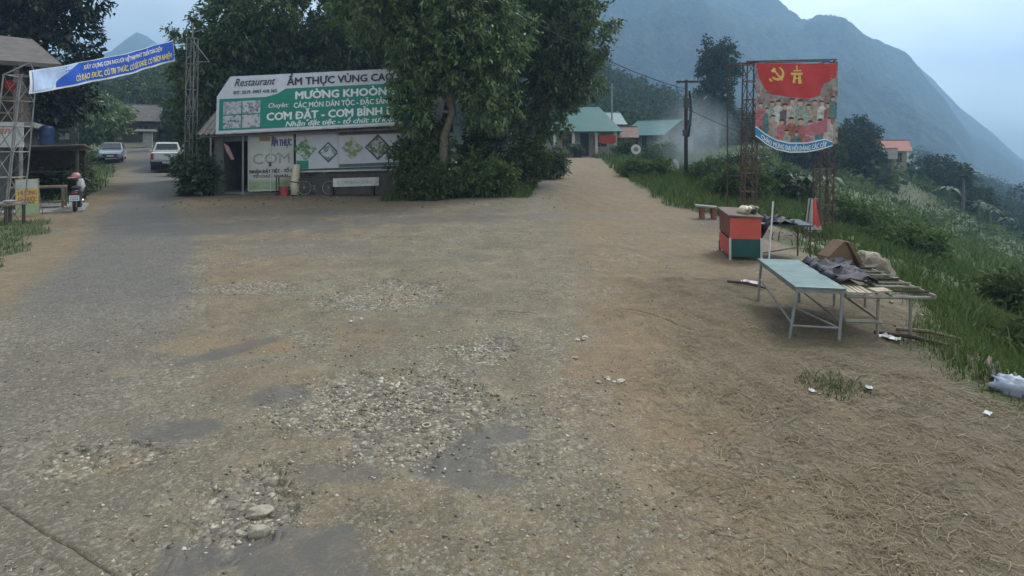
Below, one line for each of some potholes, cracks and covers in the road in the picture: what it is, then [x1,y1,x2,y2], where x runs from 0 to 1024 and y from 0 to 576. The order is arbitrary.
crack [616,306,705,334]
pothole [164,455,312,576]
pothole [298,276,461,317]
pothole [250,365,523,488]
